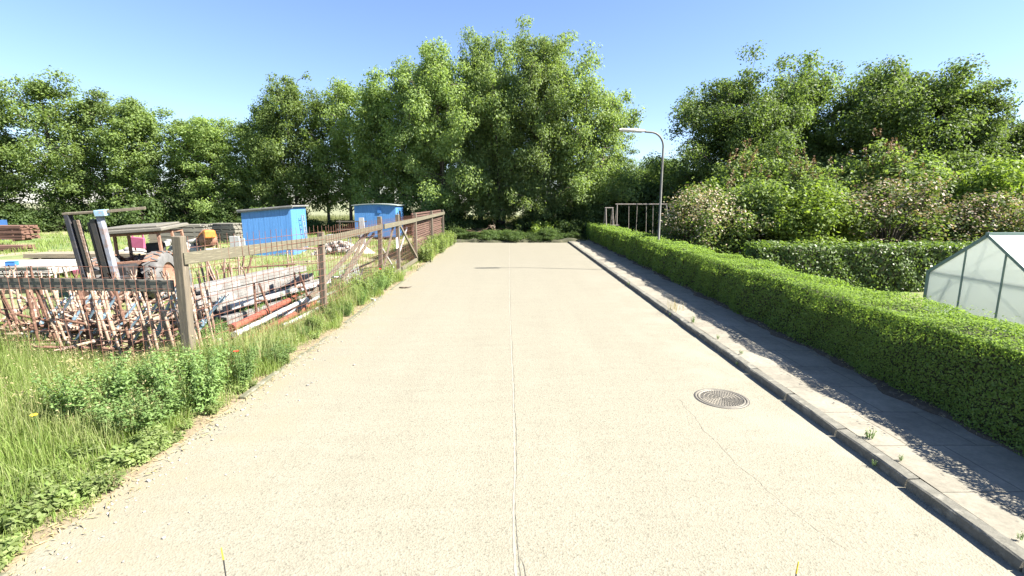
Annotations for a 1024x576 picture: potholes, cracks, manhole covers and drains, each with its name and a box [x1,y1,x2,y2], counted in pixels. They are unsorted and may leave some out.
crack [684,406,847,550]
manhole cover [694,388,750,409]
